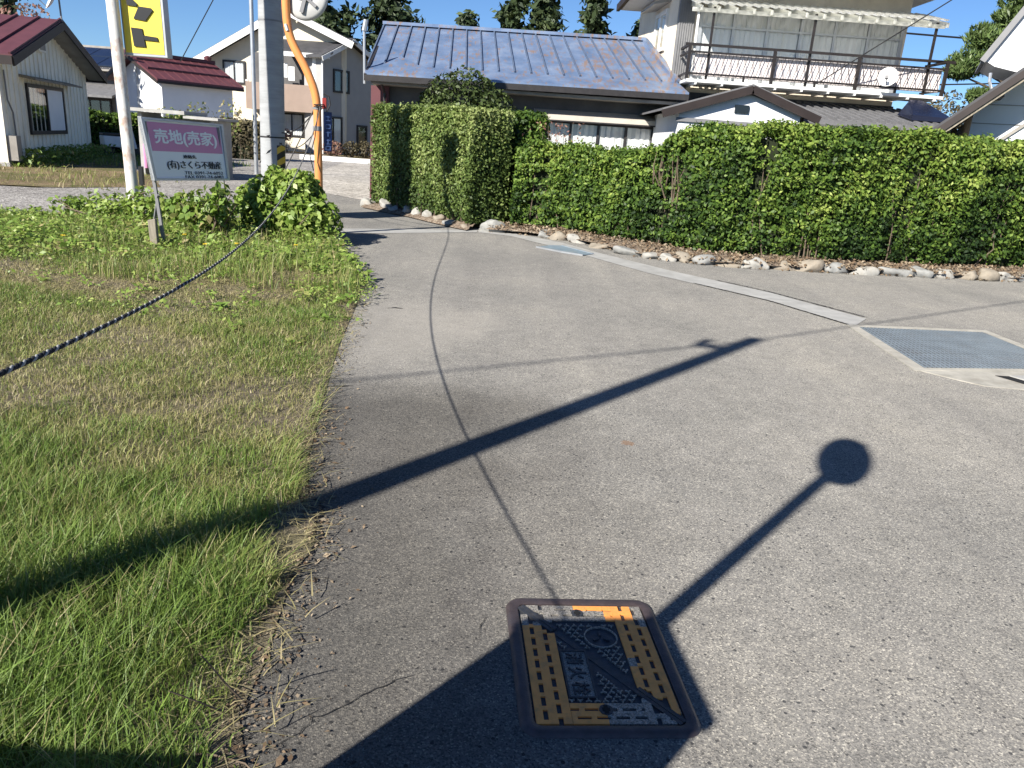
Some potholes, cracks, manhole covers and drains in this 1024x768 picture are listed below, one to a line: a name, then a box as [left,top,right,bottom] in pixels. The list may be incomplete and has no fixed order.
manhole cover [506,598,701,739]
crack [266,665,425,752]
drain grate [847,324,1024,390]
